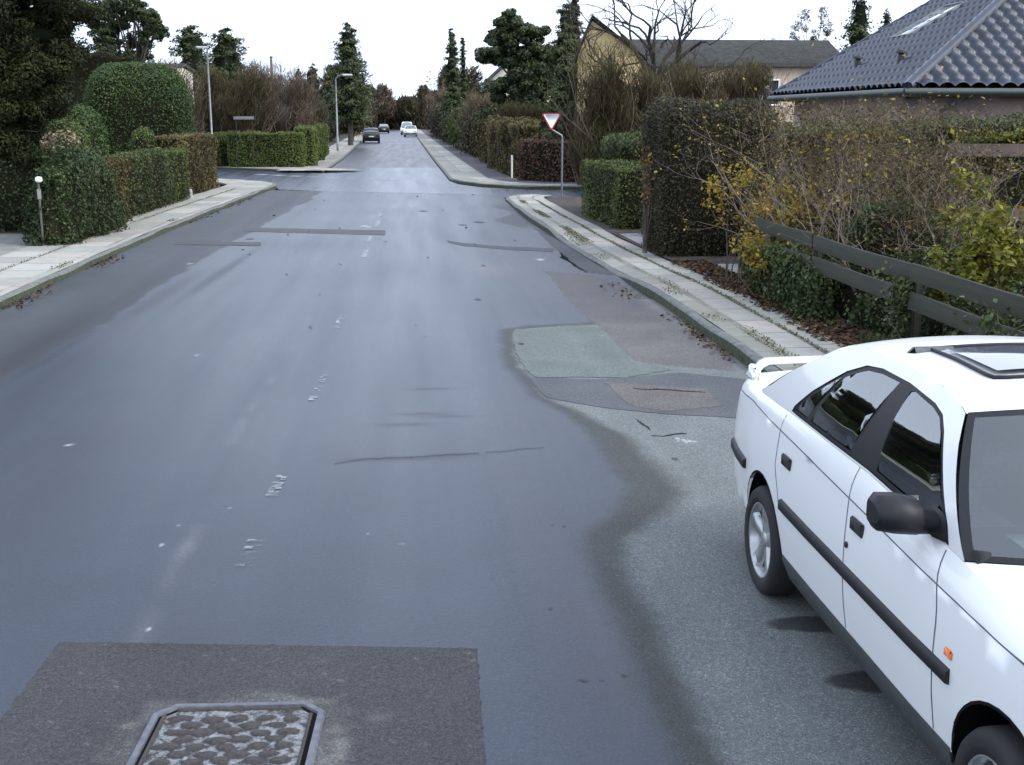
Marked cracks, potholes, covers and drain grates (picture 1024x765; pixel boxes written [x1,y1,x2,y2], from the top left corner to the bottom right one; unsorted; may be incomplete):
crack [561,253,587,272]
manhole cover [126,701,326,765]
